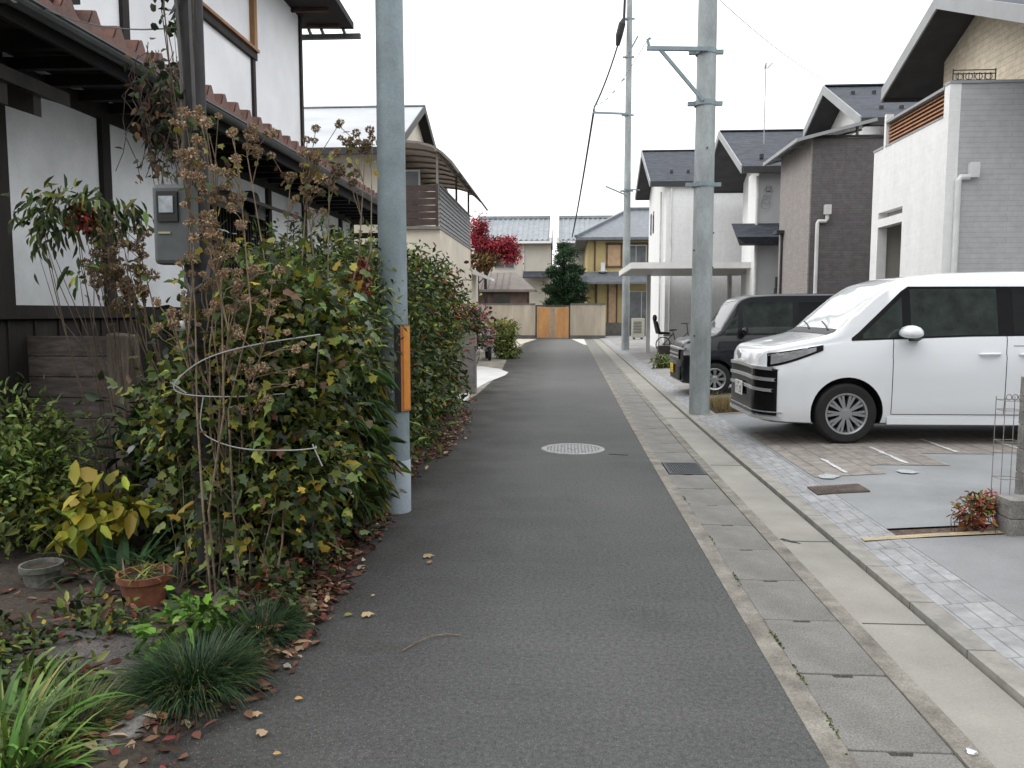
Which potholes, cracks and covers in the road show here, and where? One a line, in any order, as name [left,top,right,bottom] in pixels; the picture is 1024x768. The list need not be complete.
drain grate [662,462,707,475]
manhole cover [541,443,605,454]
